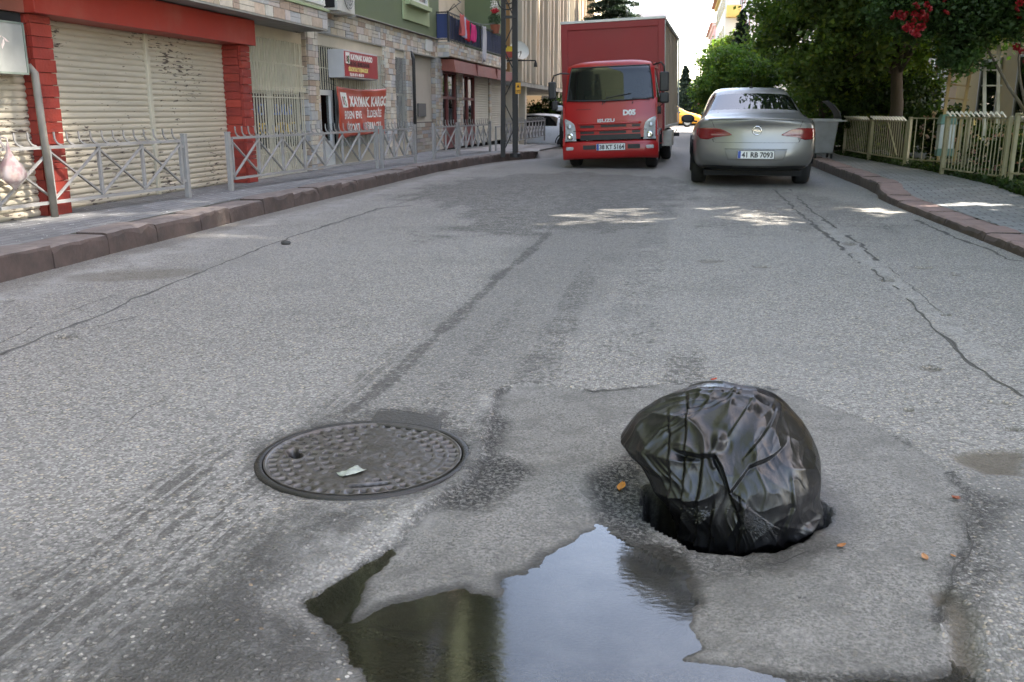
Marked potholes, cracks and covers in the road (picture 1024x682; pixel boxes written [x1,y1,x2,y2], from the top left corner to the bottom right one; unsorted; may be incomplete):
crack [773,189,1023,396]
pothole [601,467,878,575]
crack [0,205,413,355]
manhole cover [254,410,470,501]
pothole [287,523,949,682]
